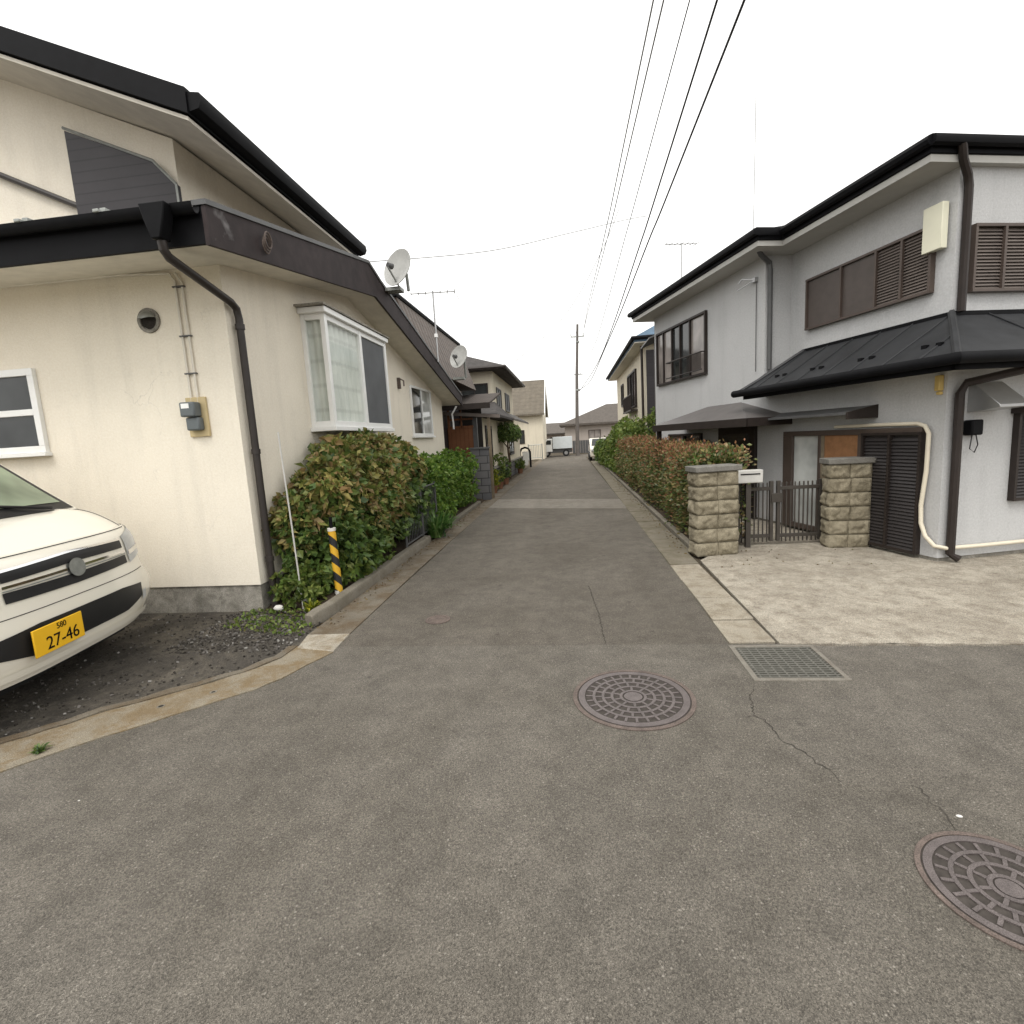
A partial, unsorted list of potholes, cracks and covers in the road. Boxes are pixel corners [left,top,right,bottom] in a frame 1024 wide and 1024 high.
crack [744,687,842,783]
utility cover [425,615,451,624]
manhole cover [914,831,1024,952]
manhole cover [573,670,697,731]
crack [588,586,606,644]
crack [913,785,956,831]
drain grate [728,645,853,681]
